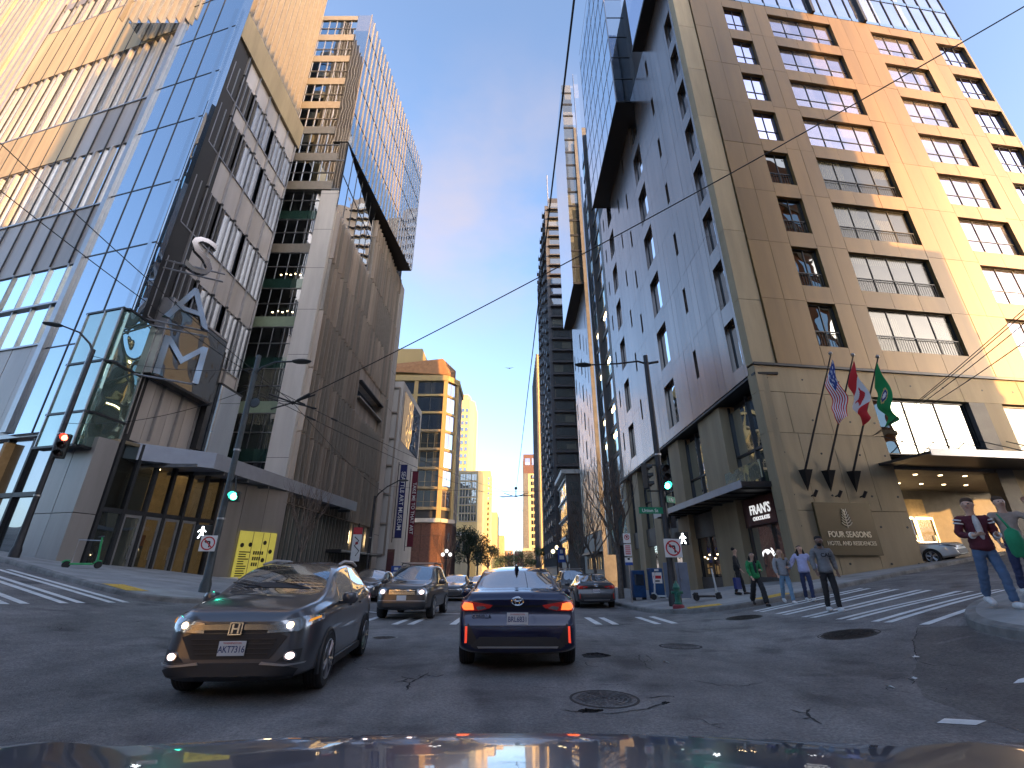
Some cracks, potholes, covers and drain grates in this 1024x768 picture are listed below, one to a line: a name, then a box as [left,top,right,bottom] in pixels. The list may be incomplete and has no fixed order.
manhole cover [569,690,640,709]
crack [354,655,442,690]
manhole cover [817,629,881,640]
crack [567,696,674,714]
crack [793,709,822,724]
